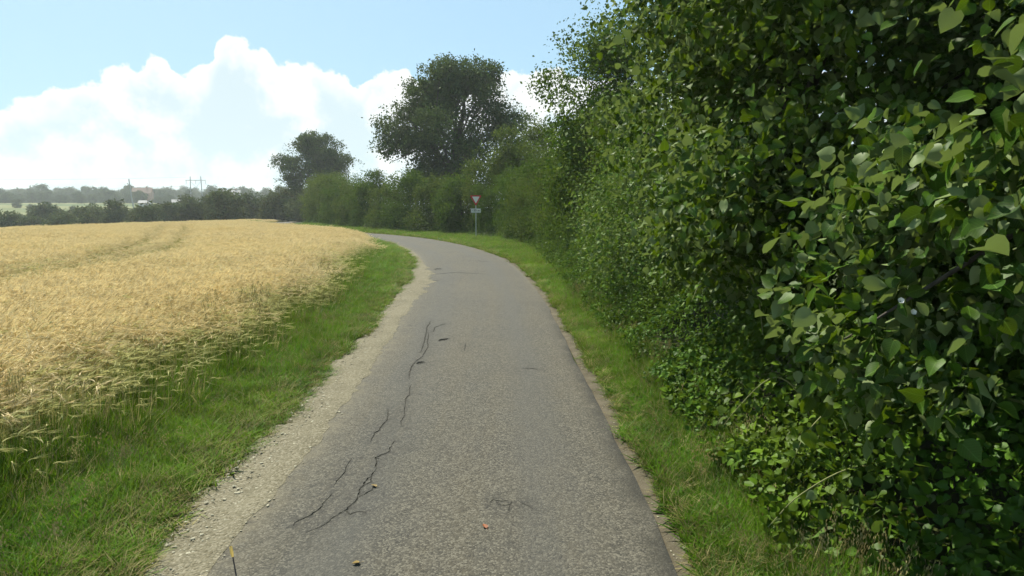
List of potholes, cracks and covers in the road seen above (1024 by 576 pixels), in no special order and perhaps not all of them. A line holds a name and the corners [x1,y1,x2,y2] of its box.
crack [293,322,443,532]
